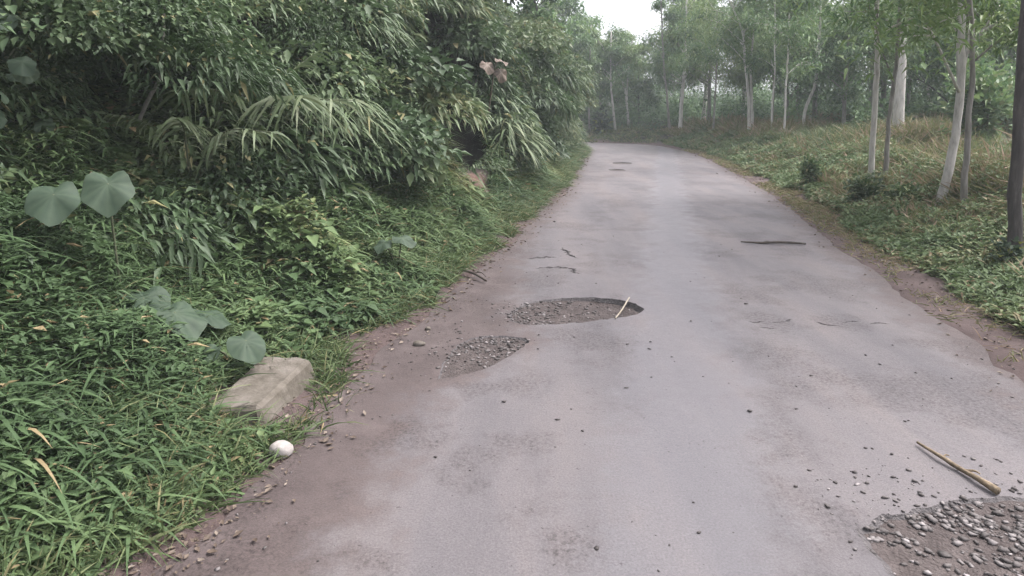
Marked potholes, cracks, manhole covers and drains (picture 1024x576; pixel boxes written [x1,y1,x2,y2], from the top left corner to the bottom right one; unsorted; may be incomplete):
pothole [855,496,1024,576]
pothole [438,336,529,379]
crack [752,319,886,329]
pothole [509,297,644,325]
crack [529,248,579,274]
